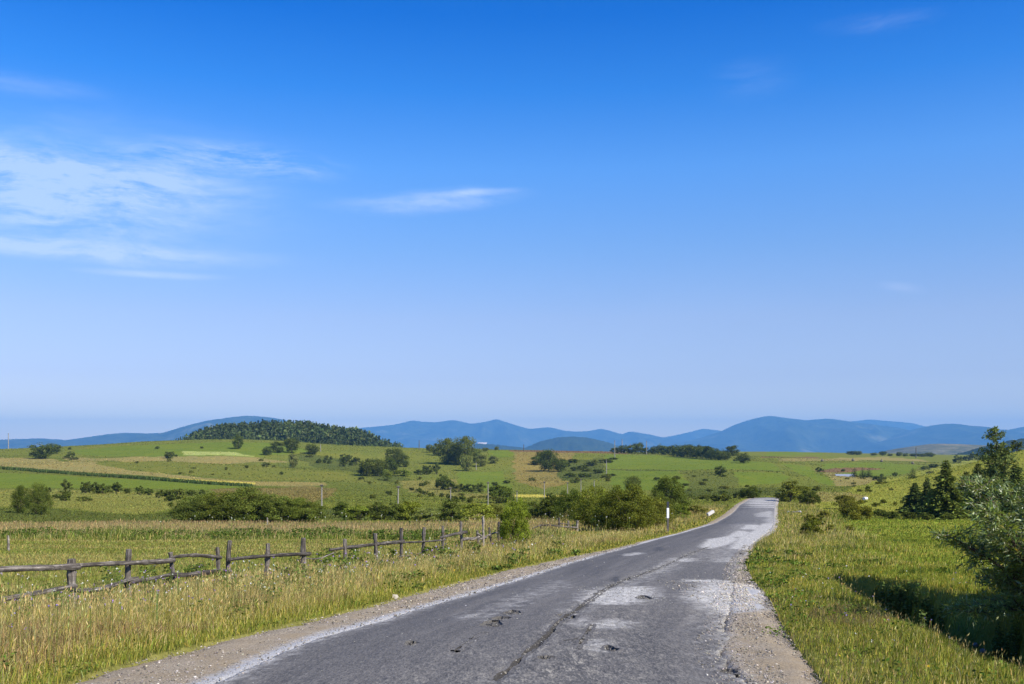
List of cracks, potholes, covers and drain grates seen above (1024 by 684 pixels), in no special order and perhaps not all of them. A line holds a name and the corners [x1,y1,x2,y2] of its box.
pothole [599,644,623,652]
pothole [477,619,506,627]
crack [564,624,597,649]
